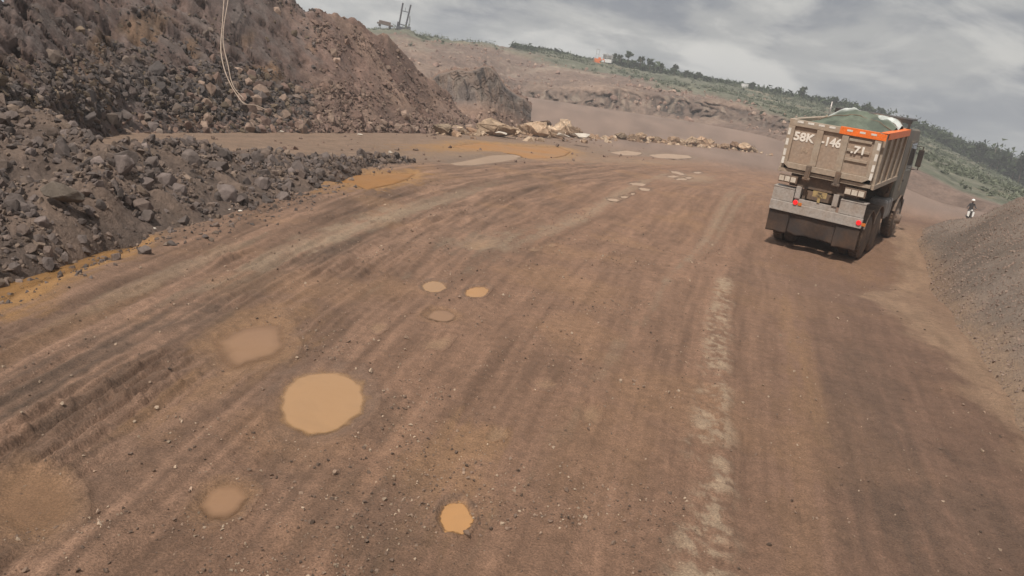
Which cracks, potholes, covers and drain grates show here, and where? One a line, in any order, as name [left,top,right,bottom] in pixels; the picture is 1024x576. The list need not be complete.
pothole [417,278,452,294]
pothole [0,448,93,556]
pothole [191,310,304,385]
pothole [419,305,464,324]
pothole [261,359,383,451]
pothole [434,494,479,538]
pothole [461,283,494,299]
pothole [184,473,266,529]
